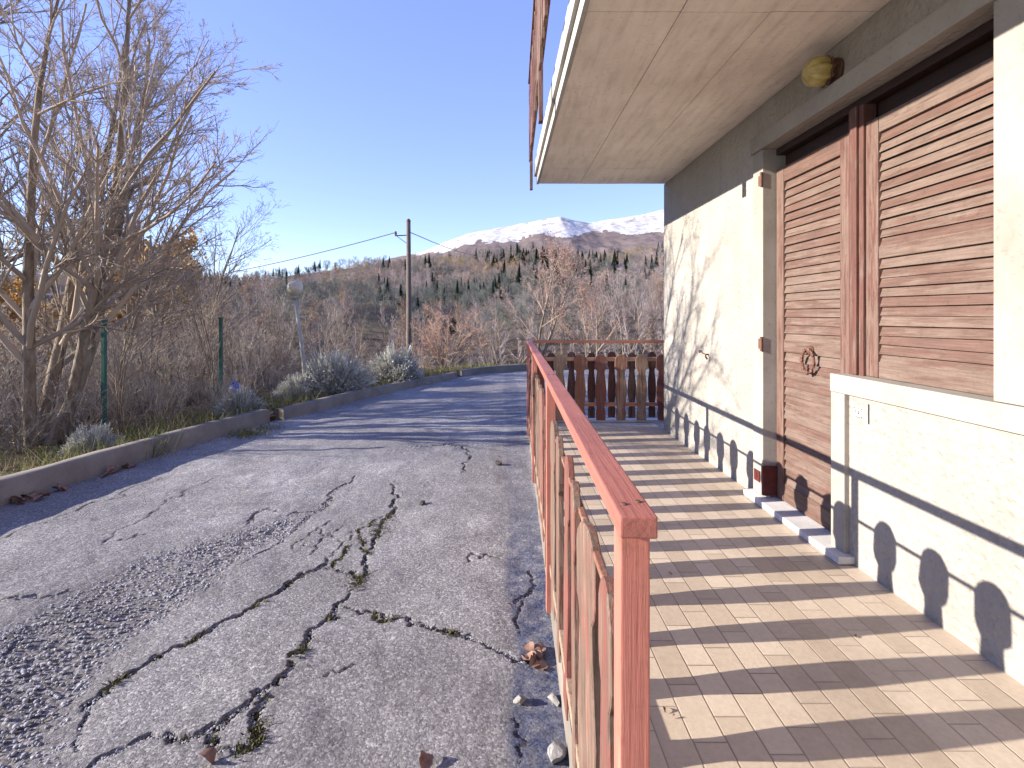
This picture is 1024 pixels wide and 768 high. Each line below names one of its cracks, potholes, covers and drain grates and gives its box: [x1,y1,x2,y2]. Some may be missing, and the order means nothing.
crack [73,478,407,768]
crack [514,721,528,764]
crack [357,611,514,661]
